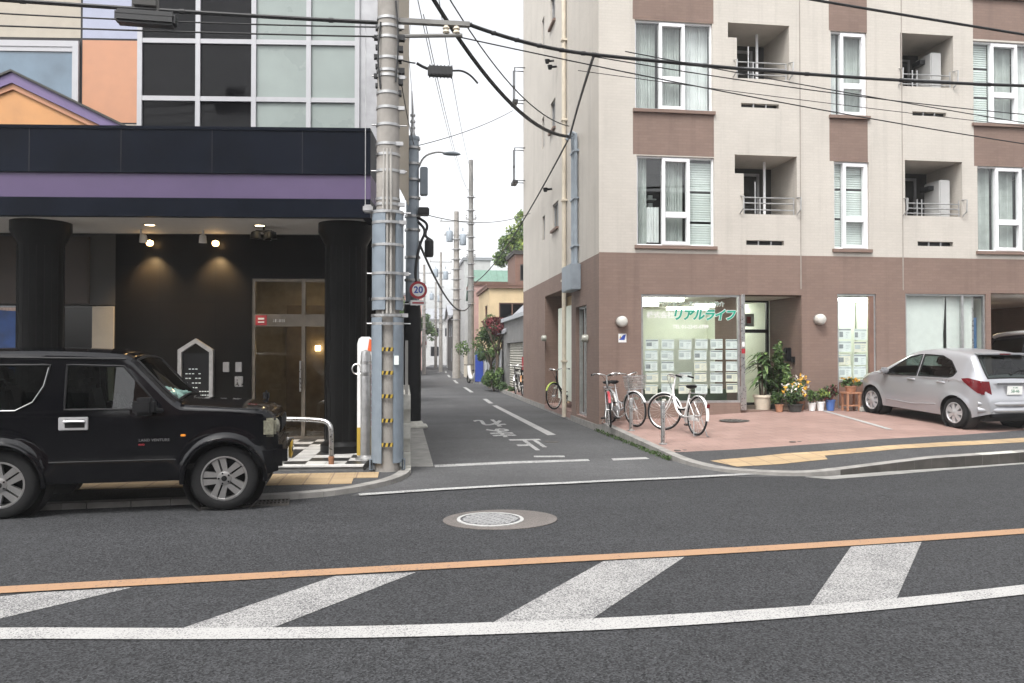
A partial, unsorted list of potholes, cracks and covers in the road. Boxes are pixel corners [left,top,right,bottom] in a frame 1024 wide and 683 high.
drain grate [200,498,290,509]
manhole cover [443,510,557,530]
